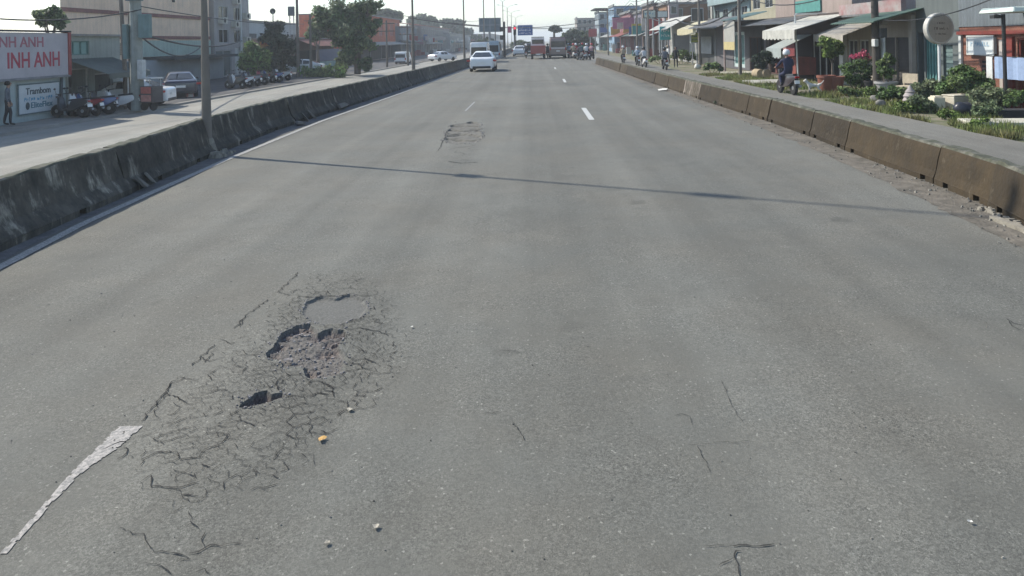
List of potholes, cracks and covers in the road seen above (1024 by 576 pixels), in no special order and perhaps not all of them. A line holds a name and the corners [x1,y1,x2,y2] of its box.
crack [121,267,413,574]
pothole [258,319,354,381]
pothole [232,385,291,409]
crack [710,544,772,576]
